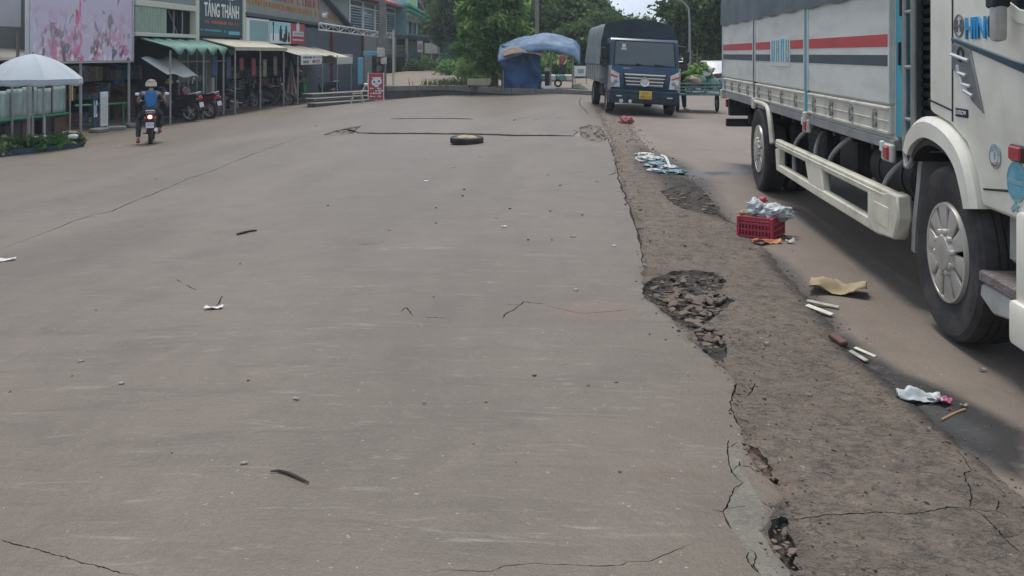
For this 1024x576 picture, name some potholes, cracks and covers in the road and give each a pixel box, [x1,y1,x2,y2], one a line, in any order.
crack [715,381,1022,553]
crack [746,550,760,574]
pothole [579,125,606,142]
pothole [642,270,735,331]
pothole [741,442,780,486]
crack [426,543,693,573]
crack [0,539,133,575]
crack [607,138,644,264]
crack [5,139,295,248]
crack [502,301,630,319]
pothole [660,185,729,222]
